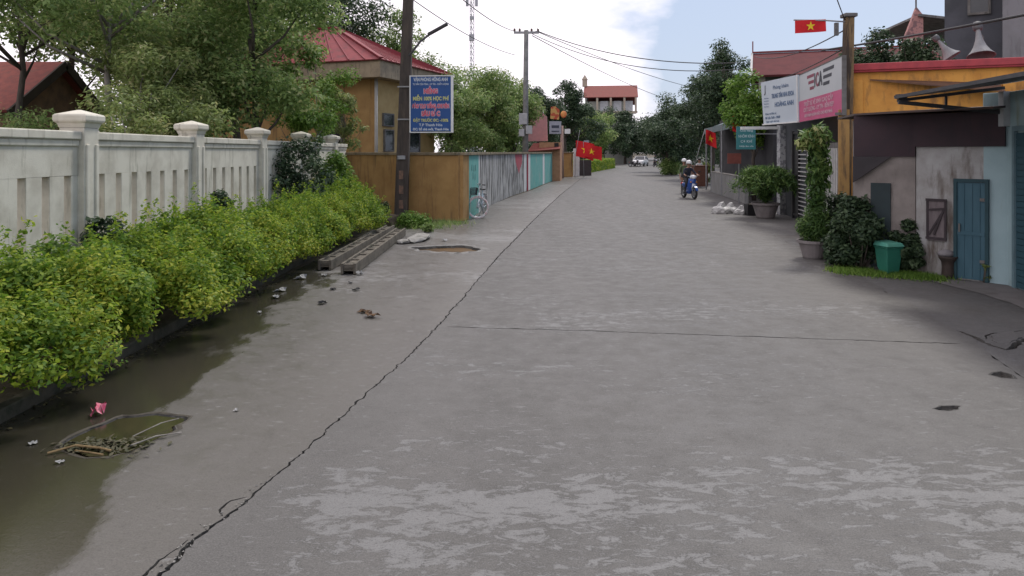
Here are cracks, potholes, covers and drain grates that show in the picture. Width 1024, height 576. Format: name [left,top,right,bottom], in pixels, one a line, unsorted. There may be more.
pothole [53,411,193,459]
pothole [408,244,489,254]
pothole [988,371,1017,379]
crack [142,196,1024,576]
